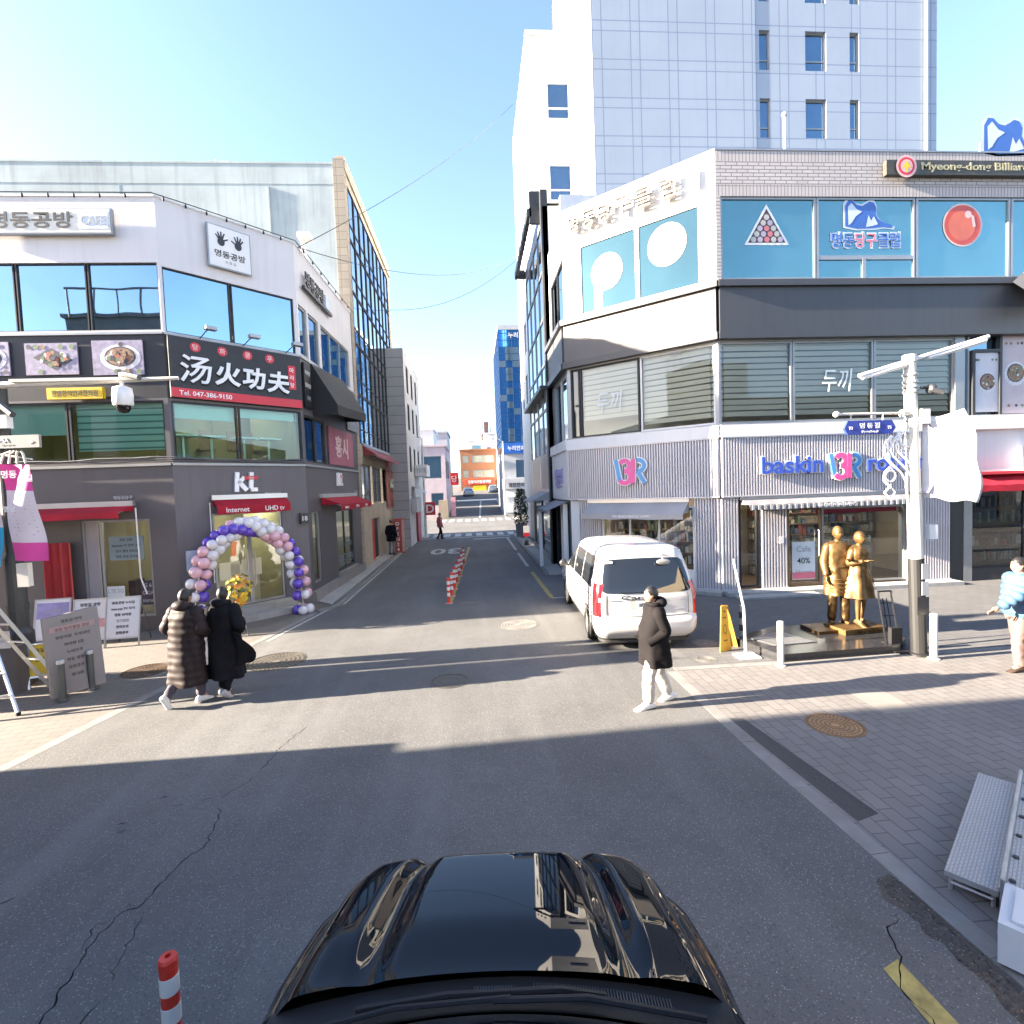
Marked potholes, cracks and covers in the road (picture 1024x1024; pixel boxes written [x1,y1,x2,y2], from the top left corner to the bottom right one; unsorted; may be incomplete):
manhole cover [119,663,168,679]
manhole cover [430,673,470,689]
manhole cover [498,619,539,630]
crack [38,729,304,1024]
manhole cover [804,713,868,738]
crack [886,915,935,1024]
manhole cover [246,652,307,671]
